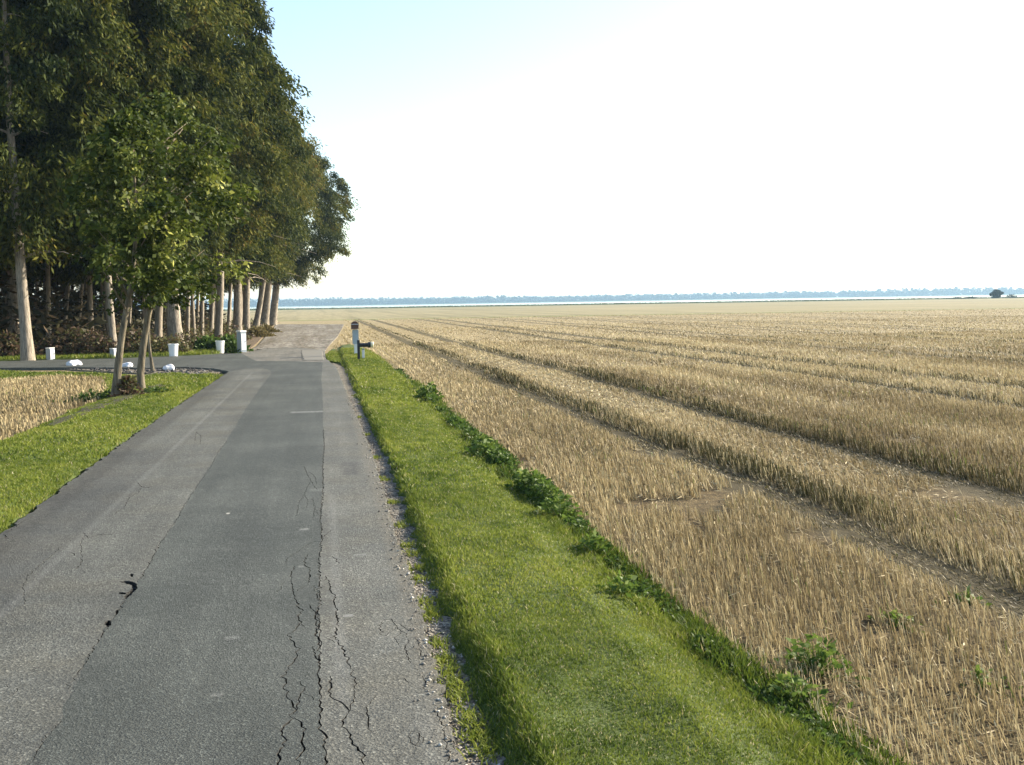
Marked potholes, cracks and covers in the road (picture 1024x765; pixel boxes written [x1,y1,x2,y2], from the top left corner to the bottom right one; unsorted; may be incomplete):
crack [276,541,375,765]
crack [22,532,101,604]
pothole [119,581,137,599]
